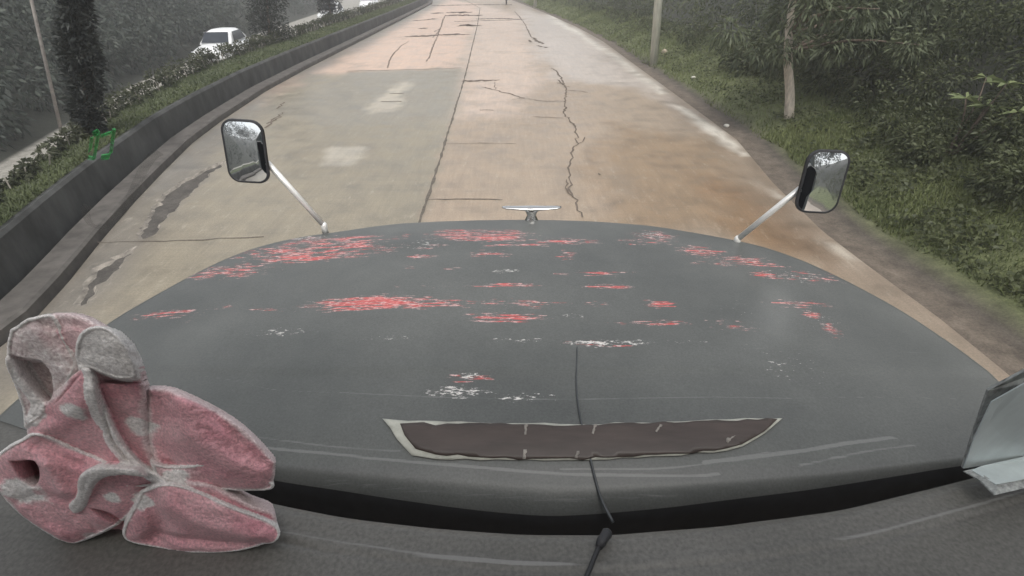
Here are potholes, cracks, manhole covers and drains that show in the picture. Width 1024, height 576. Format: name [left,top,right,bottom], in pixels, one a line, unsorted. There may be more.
crack [387,11,482,68]
crack [463,68,585,217]
